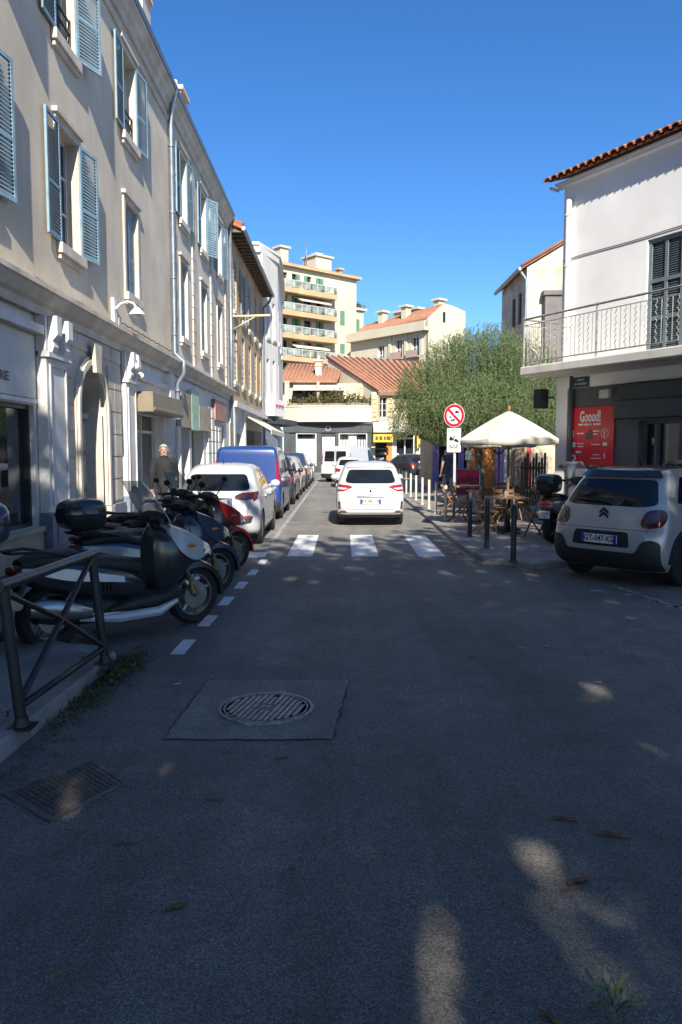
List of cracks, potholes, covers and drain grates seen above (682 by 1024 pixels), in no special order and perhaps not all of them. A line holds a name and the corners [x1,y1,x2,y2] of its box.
manhole cover [218,690,314,727]
